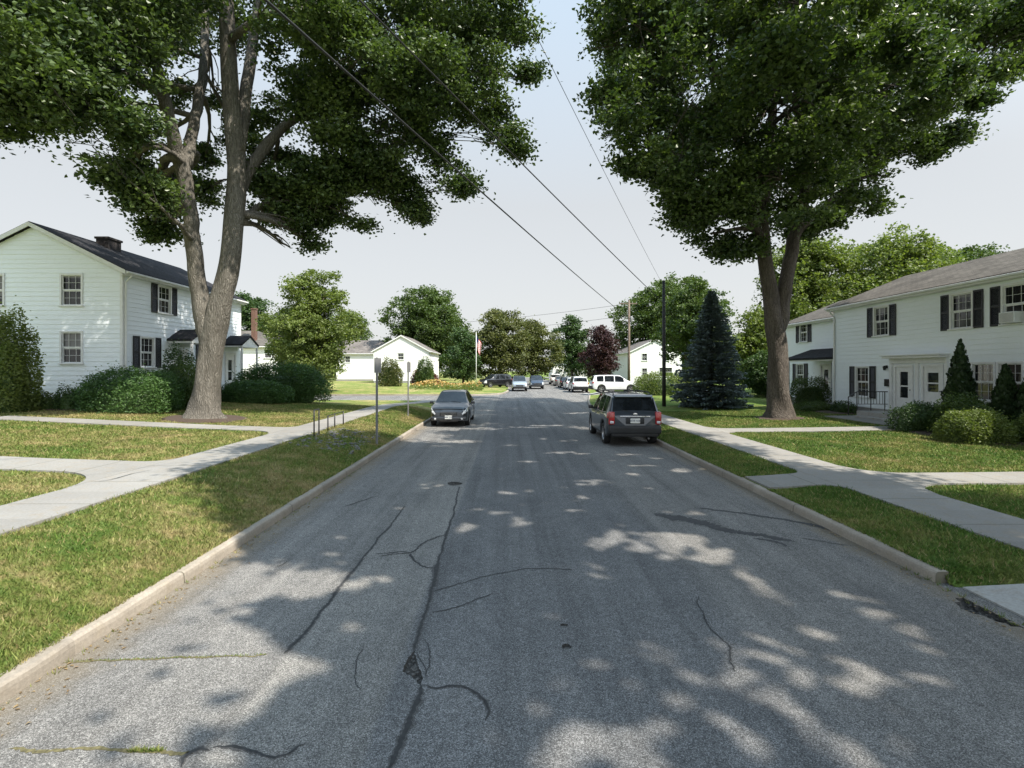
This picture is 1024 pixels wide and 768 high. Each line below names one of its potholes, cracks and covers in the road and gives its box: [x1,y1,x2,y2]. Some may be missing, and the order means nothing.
crack [696,596,735,672]
pothole [955,598,1024,628]
crack [378,534,572,612]
pothole [403,651,423,685]
crack [179,743,305,767]
crack [386,640,491,768]
